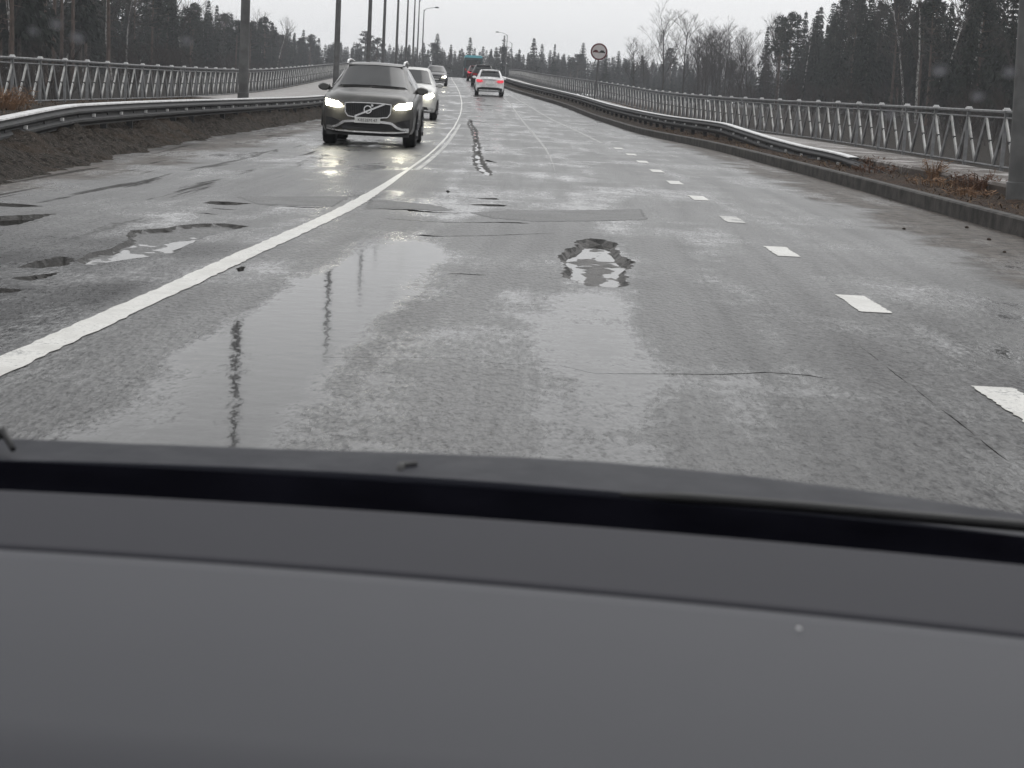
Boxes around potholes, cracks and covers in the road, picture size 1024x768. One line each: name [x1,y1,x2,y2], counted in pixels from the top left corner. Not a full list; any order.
crack [390,209,546,237]
pothole [0,214,55,226]
pothole [77,223,248,266]
pothole [558,238,635,288]
pothole [16,256,75,268]
crack [325,357,832,380]
pothole [12,271,61,281]
